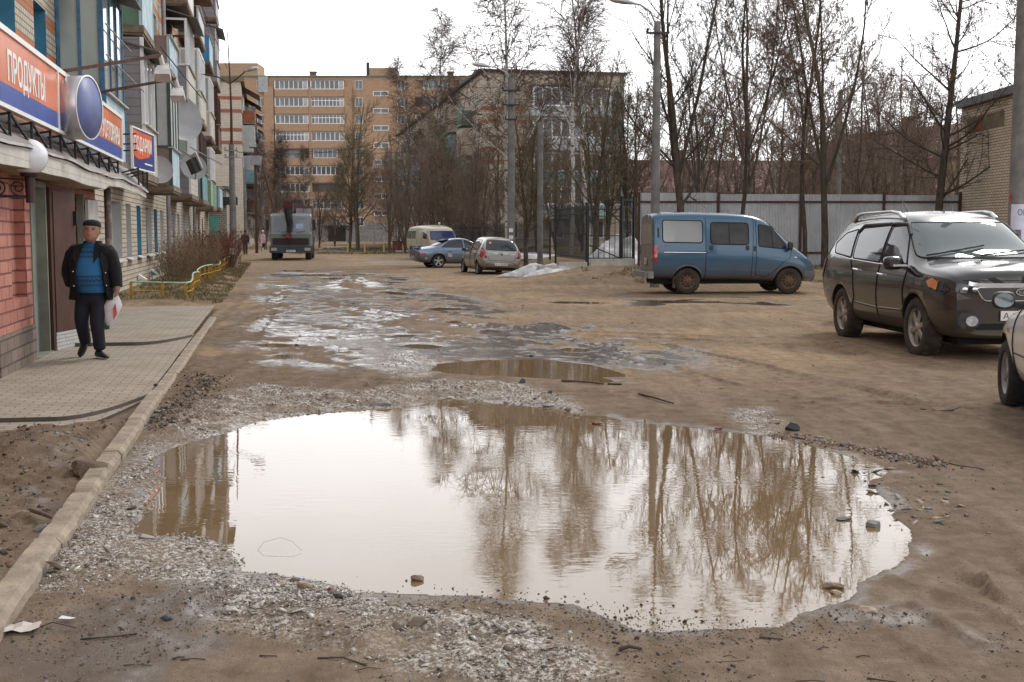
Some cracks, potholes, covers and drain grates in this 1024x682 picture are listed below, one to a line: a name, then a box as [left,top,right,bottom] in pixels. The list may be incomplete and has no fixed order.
pothole [422,357,635,383]
pothole [116,397,923,636]
